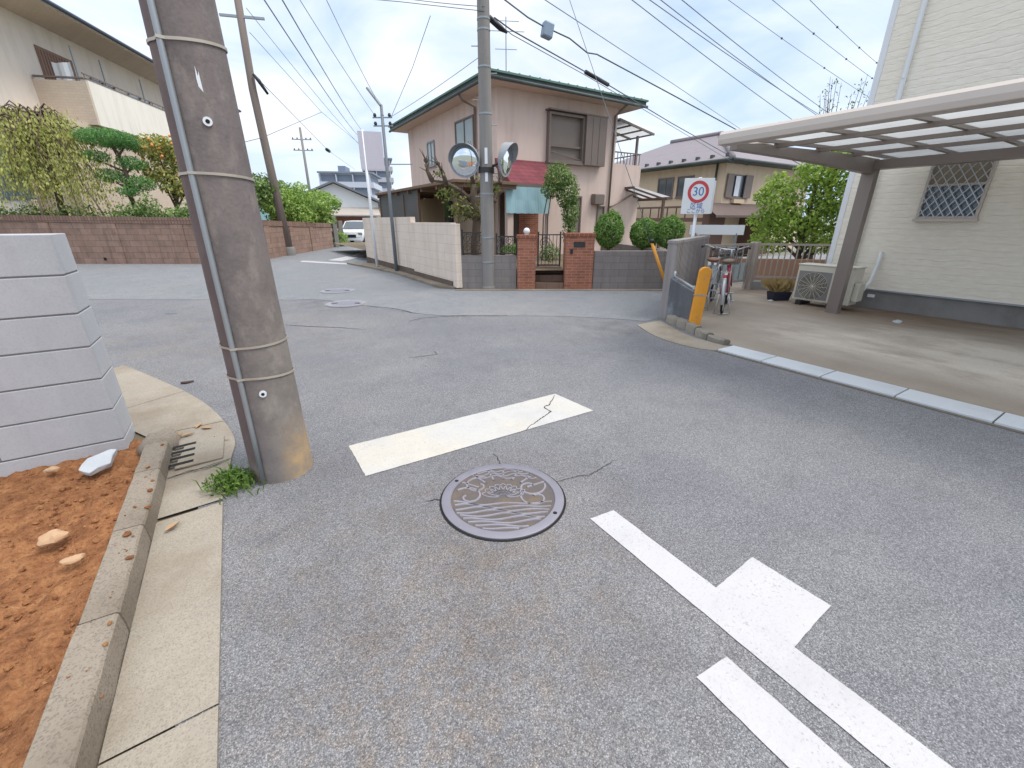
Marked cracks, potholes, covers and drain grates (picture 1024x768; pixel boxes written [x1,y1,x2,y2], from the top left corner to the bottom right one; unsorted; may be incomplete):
manhole cover [324,300,367,308]
manhole cover [440,464,566,542]
